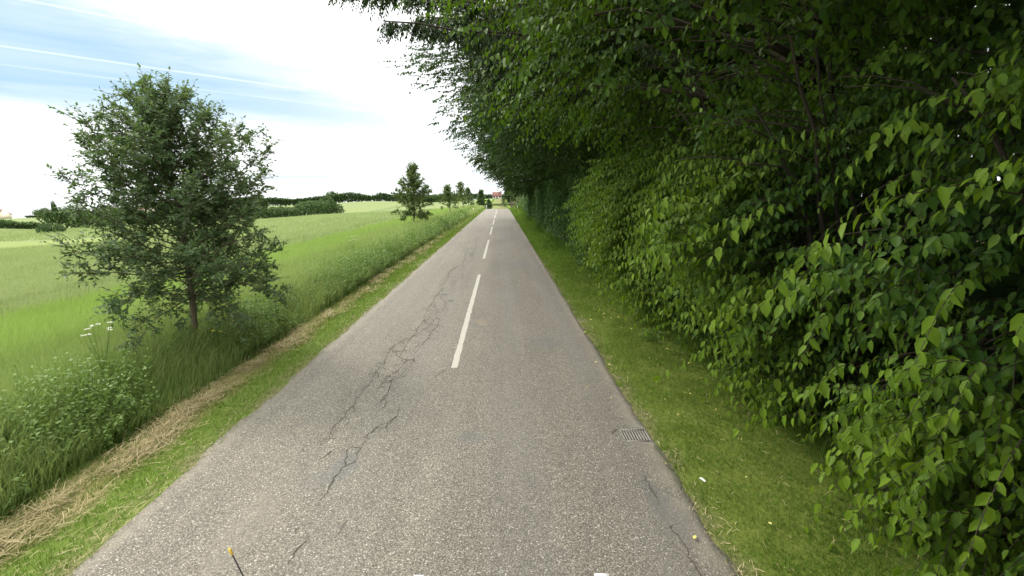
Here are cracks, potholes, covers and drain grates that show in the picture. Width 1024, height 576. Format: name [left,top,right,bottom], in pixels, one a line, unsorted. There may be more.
drain grate [620,429,652,442]
crack [318,240,479,502]
crack [668,524,701,576]
